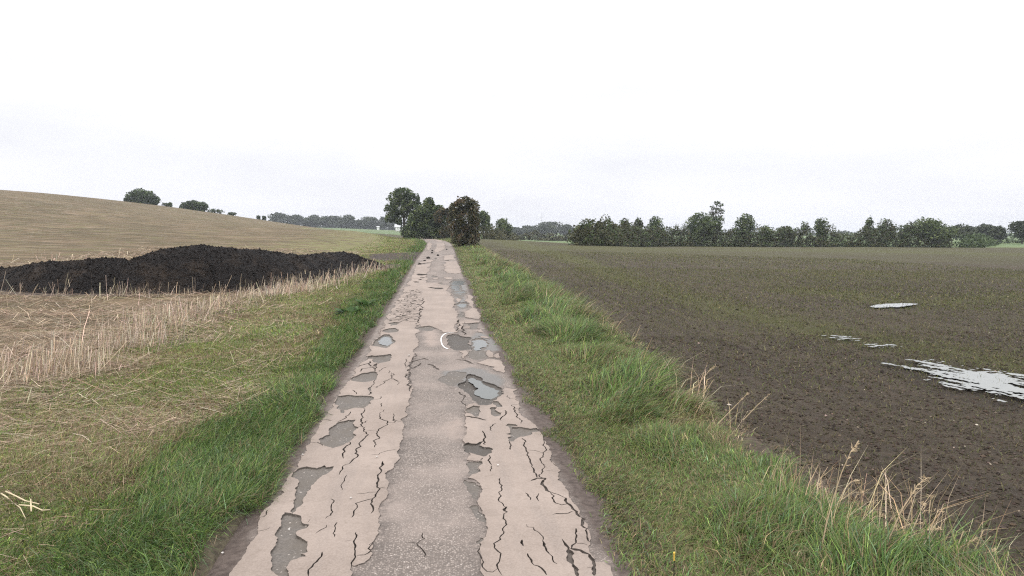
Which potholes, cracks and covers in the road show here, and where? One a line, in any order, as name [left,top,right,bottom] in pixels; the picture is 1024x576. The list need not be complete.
pothole [334,395,374,413]
pothole [463,441,493,456]
pothole [446,334,472,351]
pothole [468,338,489,360]
pothole [270,512,309,576]
pothole [458,374,503,405]
pothole [291,465,334,514]
crack [388,289,425,324]
pothole [506,424,540,441]
pothole [319,420,358,448]
crack [459,392,596,576]
pothole [372,334,395,348]
